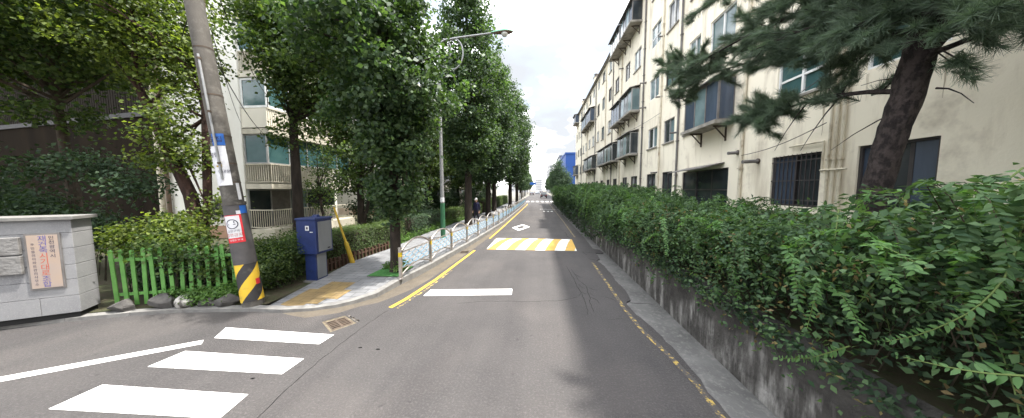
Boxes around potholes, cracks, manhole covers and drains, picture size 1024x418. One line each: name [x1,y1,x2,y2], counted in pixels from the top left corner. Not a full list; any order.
crack [468,252,608,314]
drain grate [322,316,356,332]
